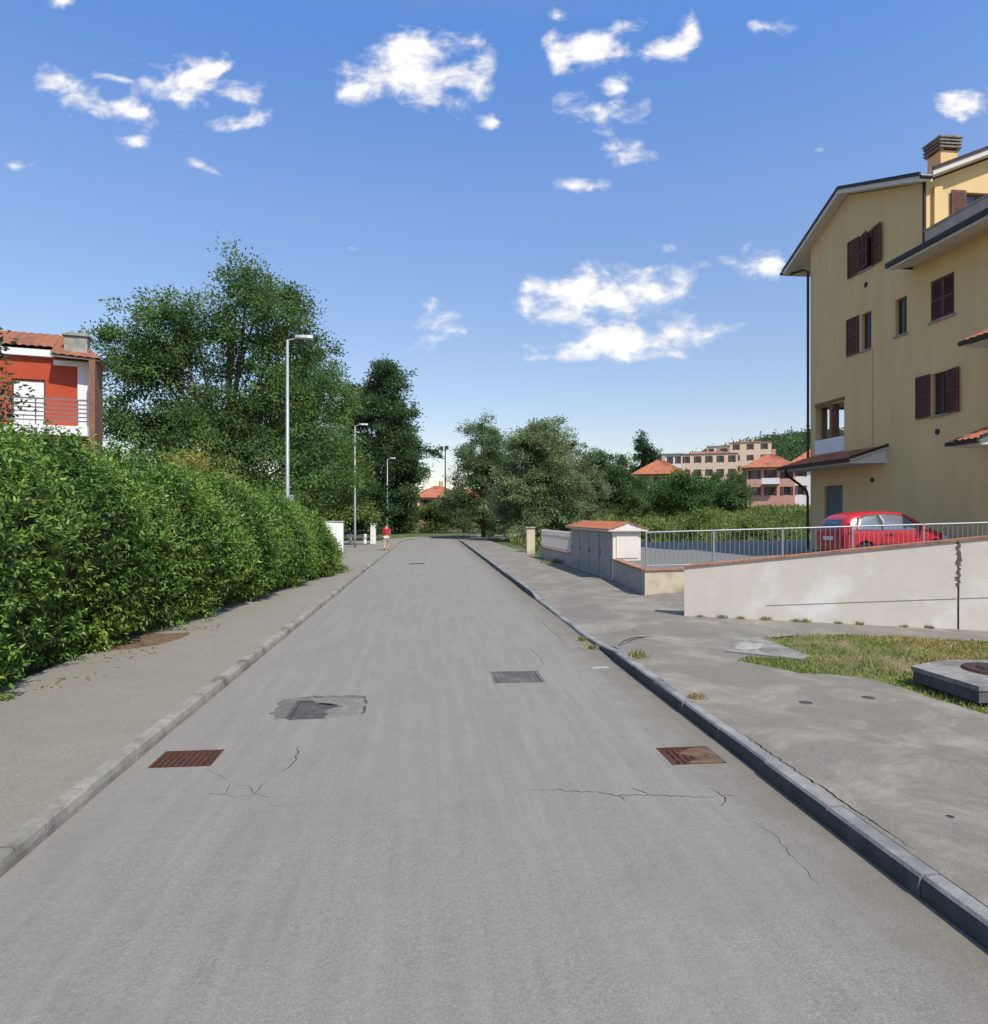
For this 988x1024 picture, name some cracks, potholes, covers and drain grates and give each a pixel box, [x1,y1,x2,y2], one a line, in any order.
drain grate [656,746,727,765]
crack [205,769,265,798]
crack [528,788,713,801]
drain grate [148,749,225,768]
